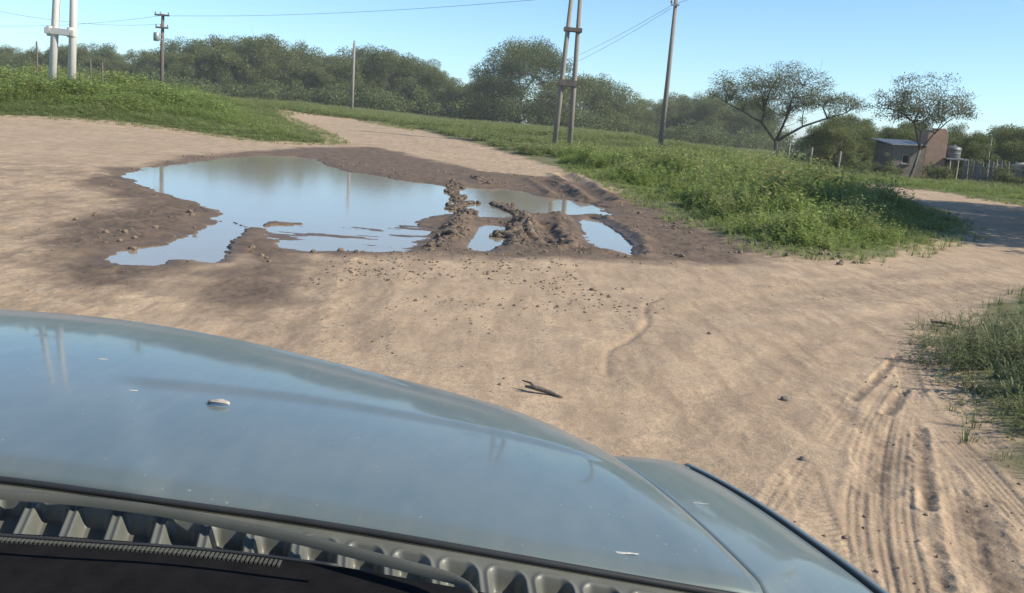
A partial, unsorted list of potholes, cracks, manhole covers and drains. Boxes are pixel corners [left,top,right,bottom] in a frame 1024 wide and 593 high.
pothole [569,214,649,255]
pothole [104,152,632,255]
